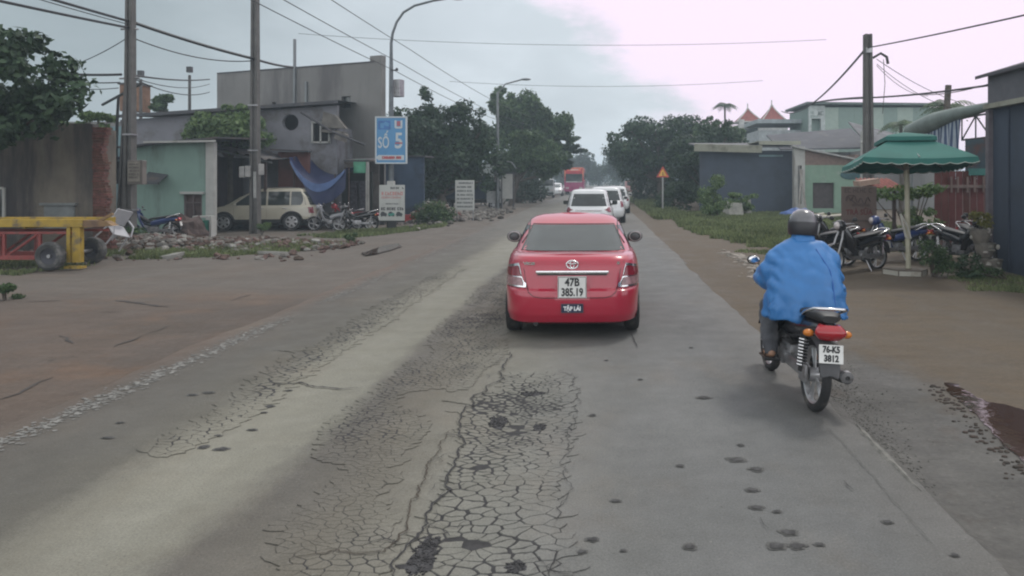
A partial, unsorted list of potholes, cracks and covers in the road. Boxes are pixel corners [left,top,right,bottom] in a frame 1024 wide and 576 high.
pothole [503,559,527,574]
pothole [488,415,509,430]
pothole [786,541,809,550]
pothole [766,542,787,550]
crack [137,266,591,576]
pothole [403,536,441,576]
pothole [777,528,799,536]
